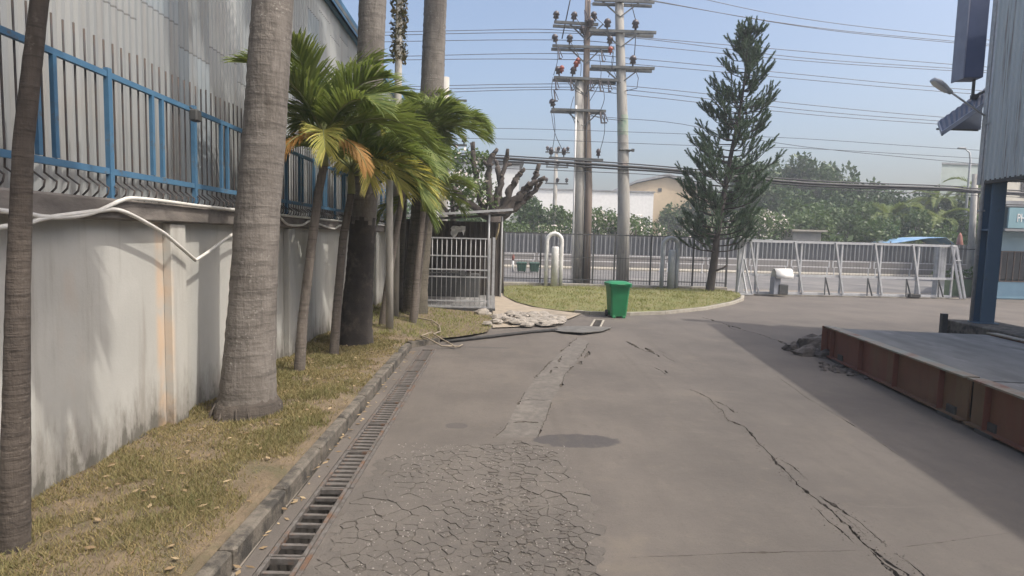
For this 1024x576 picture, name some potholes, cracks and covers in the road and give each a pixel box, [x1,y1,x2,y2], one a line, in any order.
drain grate [396,370,421,386]
drain grate [346,423,388,452]
crack [687,389,930,576]
drain grate [268,488,348,559]
crack [303,338,607,576]
drain grate [253,556,305,576]
drain grate [406,359,428,371]
drain grate [318,451,371,489]
crack [627,342,673,374]
drain grate [414,349,434,360]
drain grate [383,384,412,402]
drain grate [367,401,402,425]
